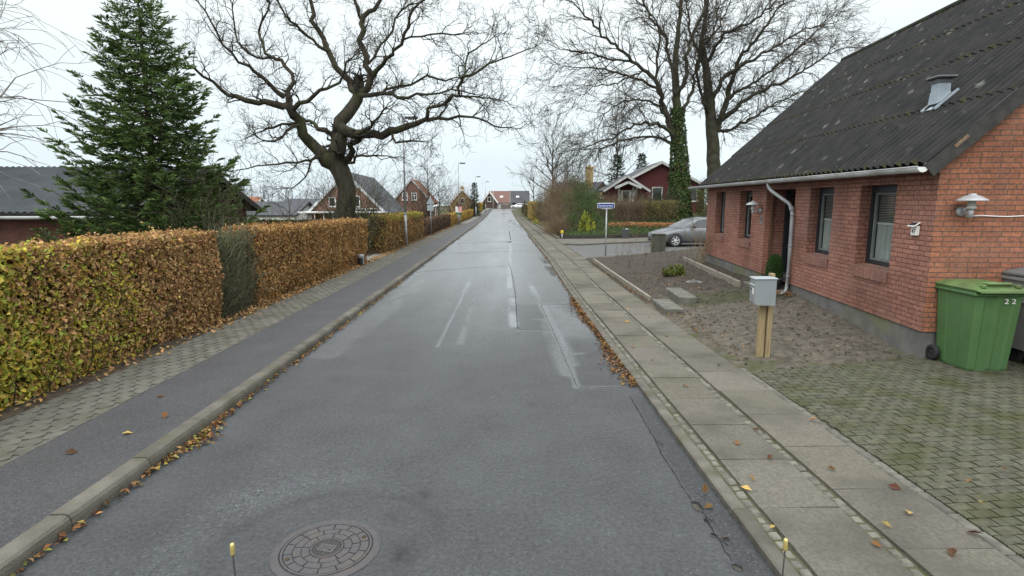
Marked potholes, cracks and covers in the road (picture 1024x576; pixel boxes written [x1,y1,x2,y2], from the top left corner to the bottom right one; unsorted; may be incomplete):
manhole cover [269,519,381,576]
